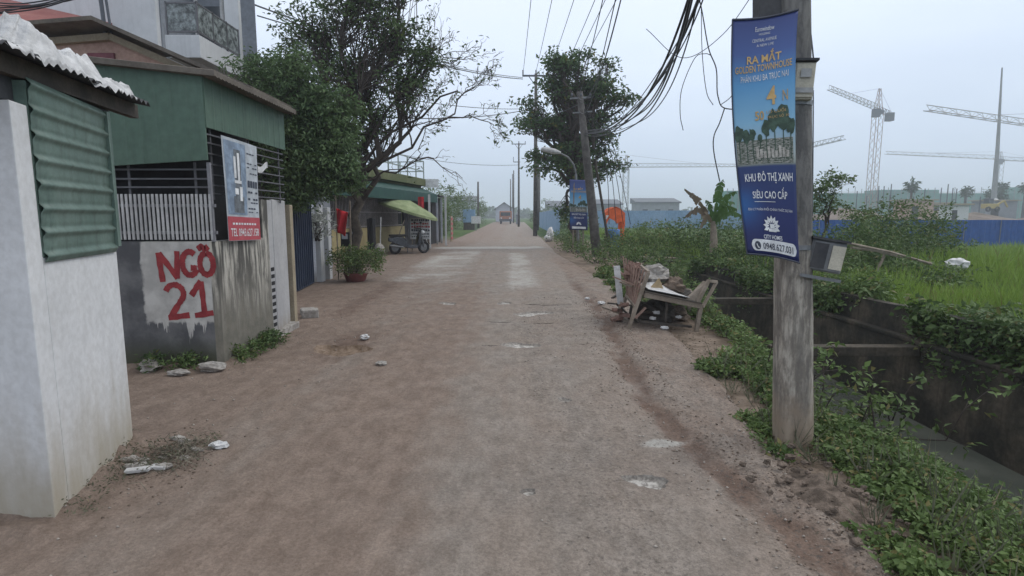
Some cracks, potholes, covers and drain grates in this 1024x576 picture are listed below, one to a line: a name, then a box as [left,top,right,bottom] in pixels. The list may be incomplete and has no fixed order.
pothole [313,345,373,357]
